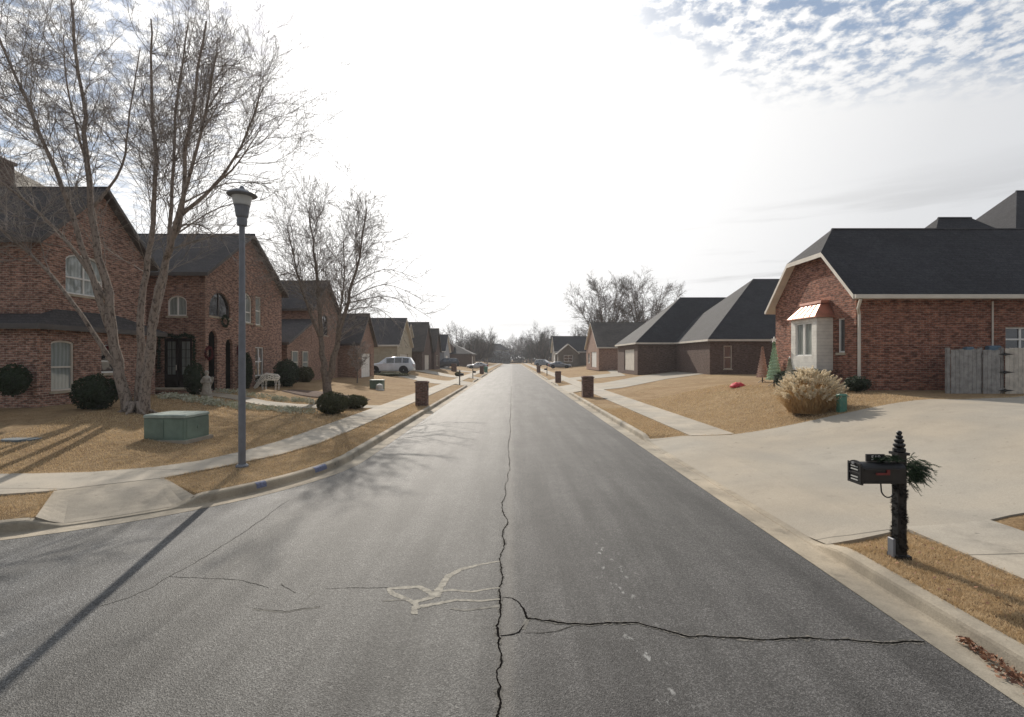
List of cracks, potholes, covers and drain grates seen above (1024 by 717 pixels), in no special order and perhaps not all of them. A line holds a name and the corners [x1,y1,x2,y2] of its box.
crack [102,500,296,606]
crack [252,387,926,717]
